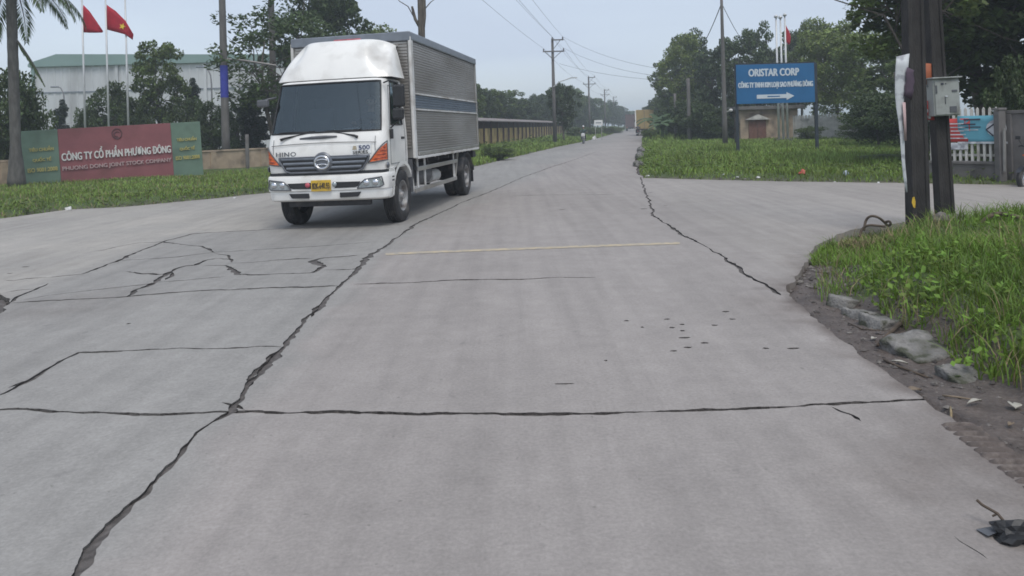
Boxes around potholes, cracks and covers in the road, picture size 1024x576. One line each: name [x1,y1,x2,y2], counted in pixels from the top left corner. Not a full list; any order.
crack [6,242,366,305]
crack [1,346,276,395]
